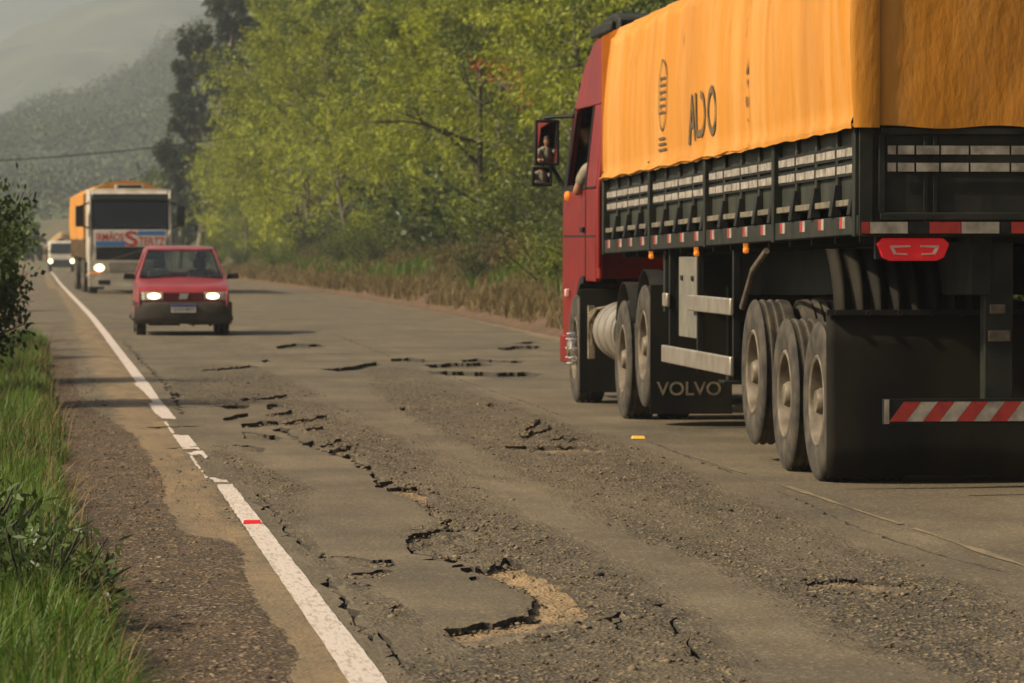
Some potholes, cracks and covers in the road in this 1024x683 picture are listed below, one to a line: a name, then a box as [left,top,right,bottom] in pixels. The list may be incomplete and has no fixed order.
crack [328,332,562,416]
crack [654,604,710,660]
pothole [405,527,480,559]
crack [320,575,411,676]
pothole [806,578,908,594]
pothole [501,445,608,455]
pothole [444,557,591,649]
